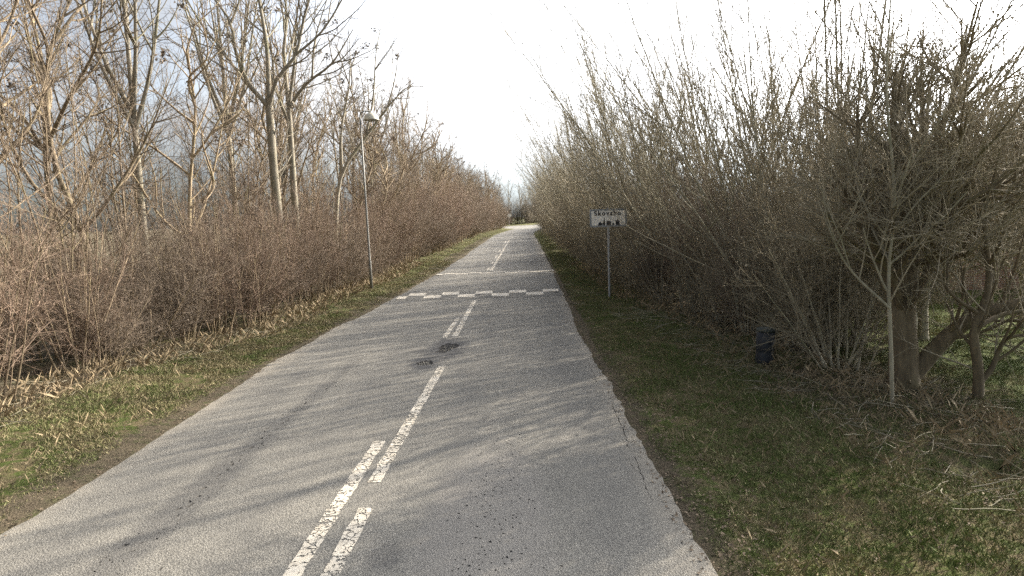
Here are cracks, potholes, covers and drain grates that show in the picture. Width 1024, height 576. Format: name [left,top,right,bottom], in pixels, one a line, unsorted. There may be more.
crack [611,403,653,501]
pothole [436,343,460,353]
